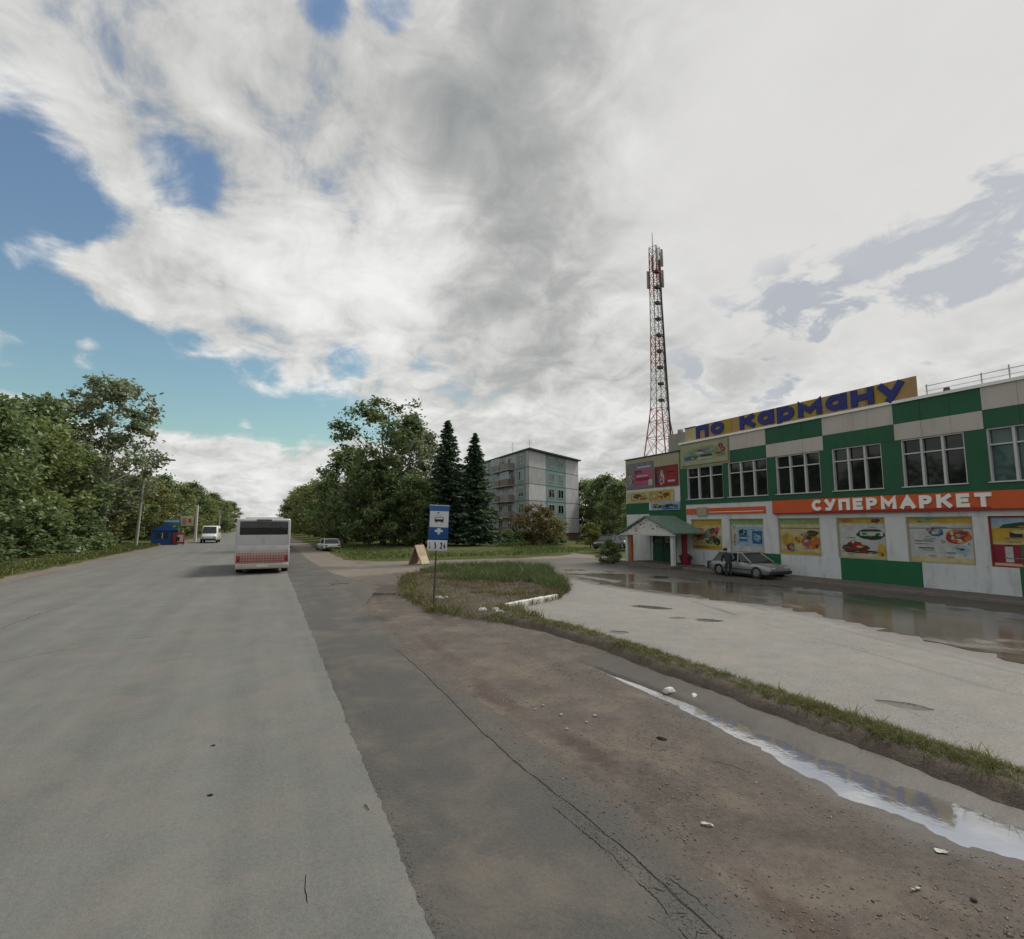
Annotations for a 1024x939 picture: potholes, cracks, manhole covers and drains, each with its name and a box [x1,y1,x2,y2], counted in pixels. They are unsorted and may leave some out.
crack [391,646,725,939]
